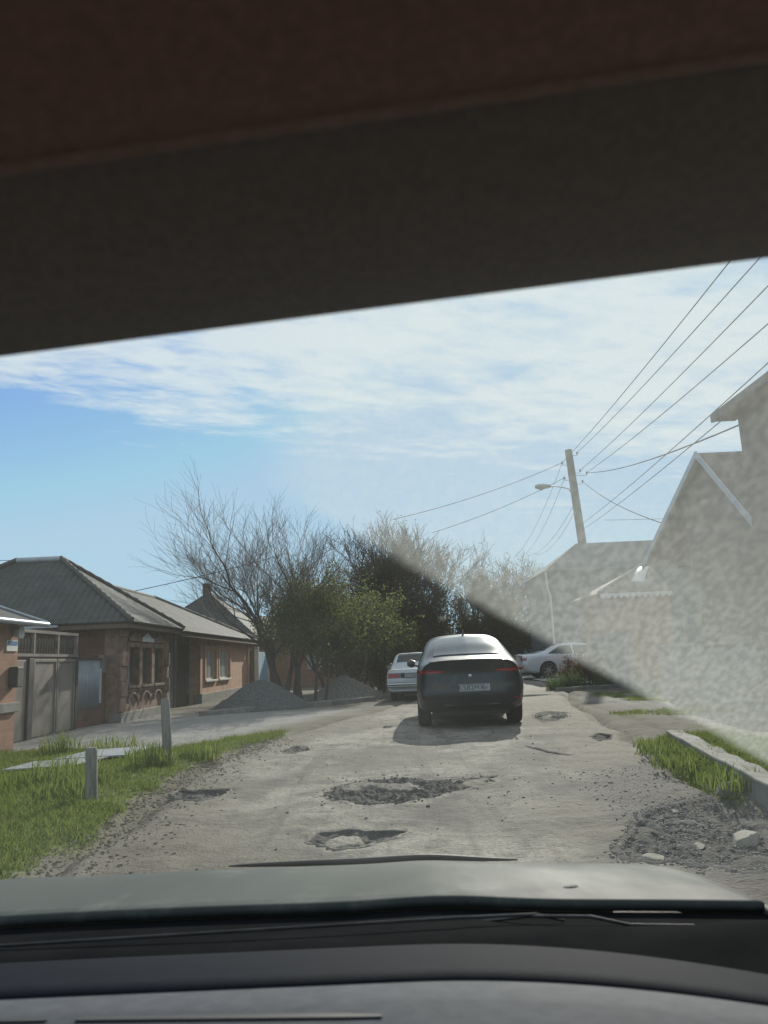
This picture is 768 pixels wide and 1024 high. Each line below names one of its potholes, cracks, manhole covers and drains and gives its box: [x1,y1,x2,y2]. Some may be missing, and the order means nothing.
pothole [303,828,412,852]
crack [528,746,574,755]
pothole [281,745,312,754]
pothole [532,710,570,723]
pothole [591,732,612,741]
pothole [312,774,507,807]
pothole [166,788,233,802]
